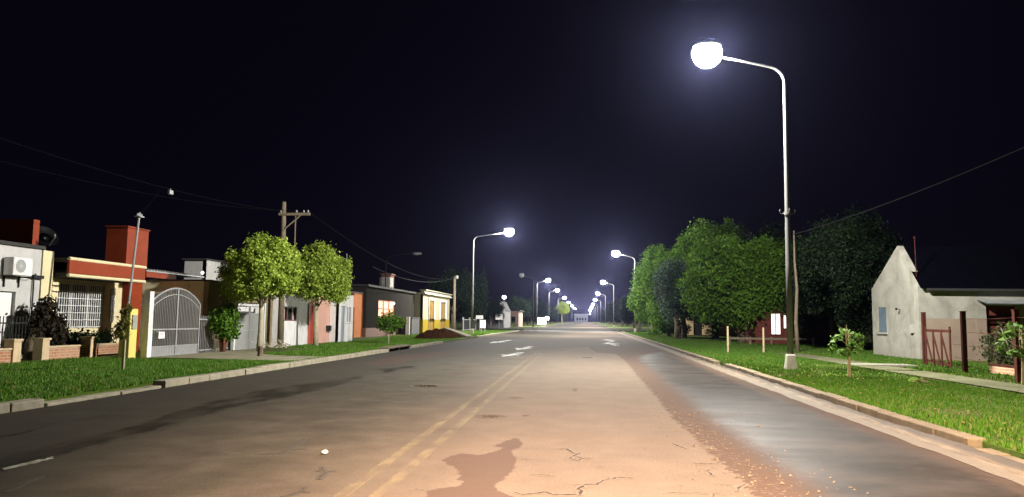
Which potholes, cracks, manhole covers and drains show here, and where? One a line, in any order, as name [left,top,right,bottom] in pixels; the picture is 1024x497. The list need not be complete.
crack [511,448,634,496]
crack [255,431,336,497]
